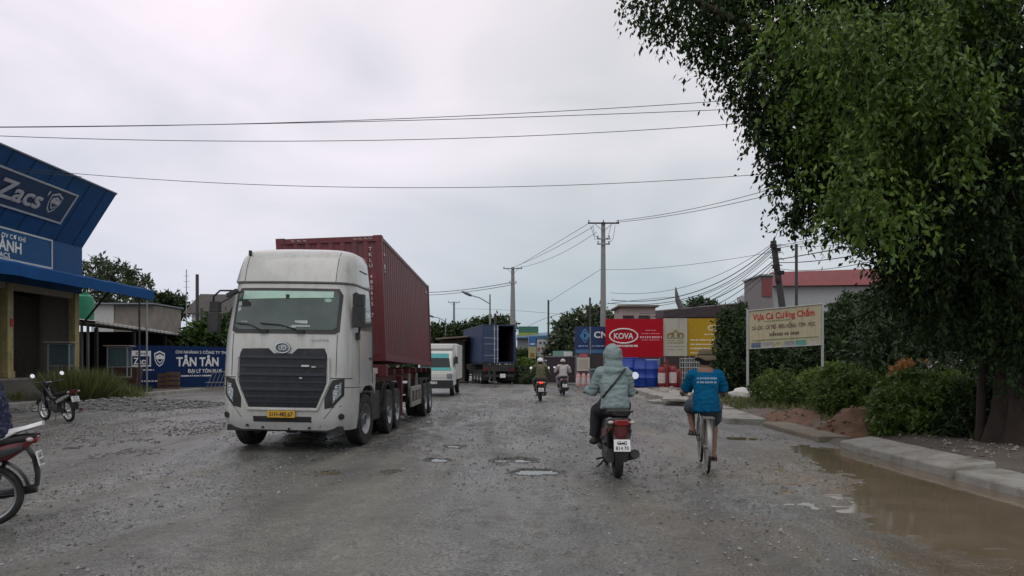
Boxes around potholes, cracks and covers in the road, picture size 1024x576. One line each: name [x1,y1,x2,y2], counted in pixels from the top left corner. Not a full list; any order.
pothole [488,456,541,464]
pothole [504,467,566,476]
pothole [303,469,354,477]
